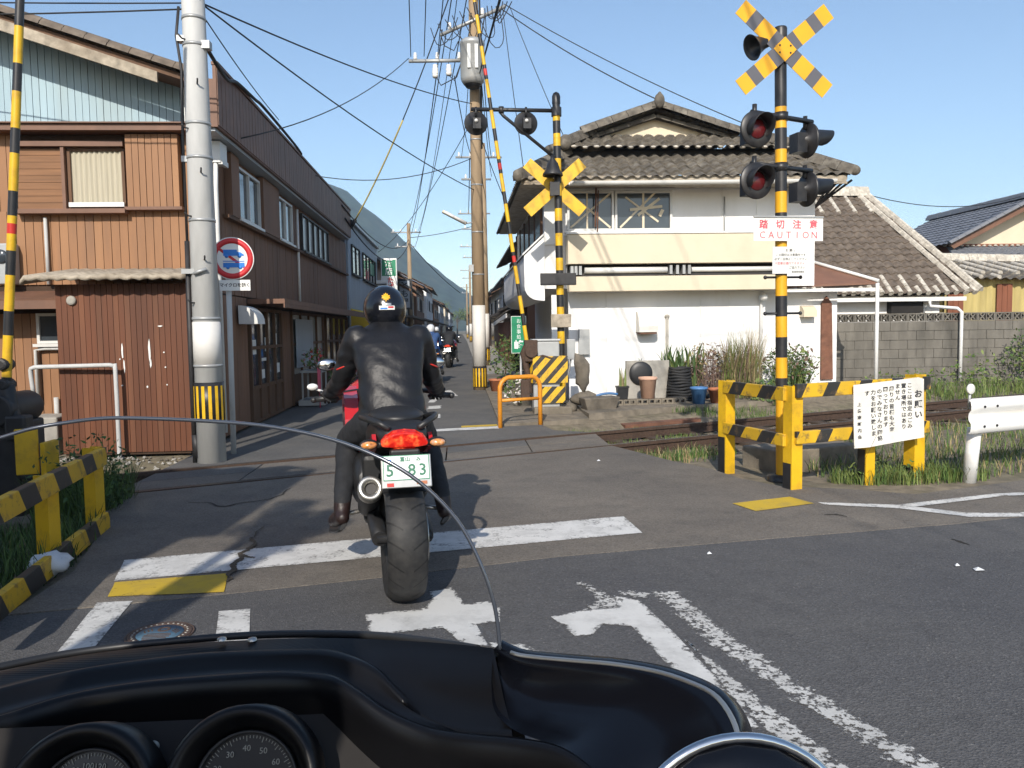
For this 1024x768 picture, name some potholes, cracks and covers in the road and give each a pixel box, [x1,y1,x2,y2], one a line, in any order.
manhole cover [124,621,195,642]
crack [226,527,263,581]
